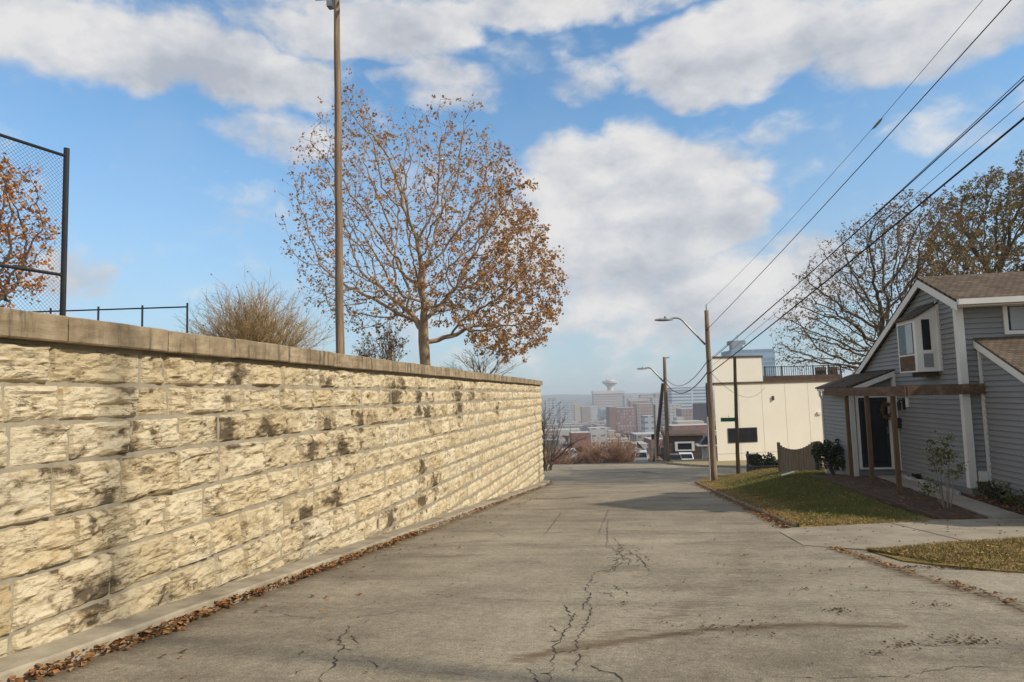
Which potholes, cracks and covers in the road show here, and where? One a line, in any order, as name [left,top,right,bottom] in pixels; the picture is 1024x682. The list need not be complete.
crack [597,512,653,577]
crack [529,563,623,682]
crack [295,610,402,682]
